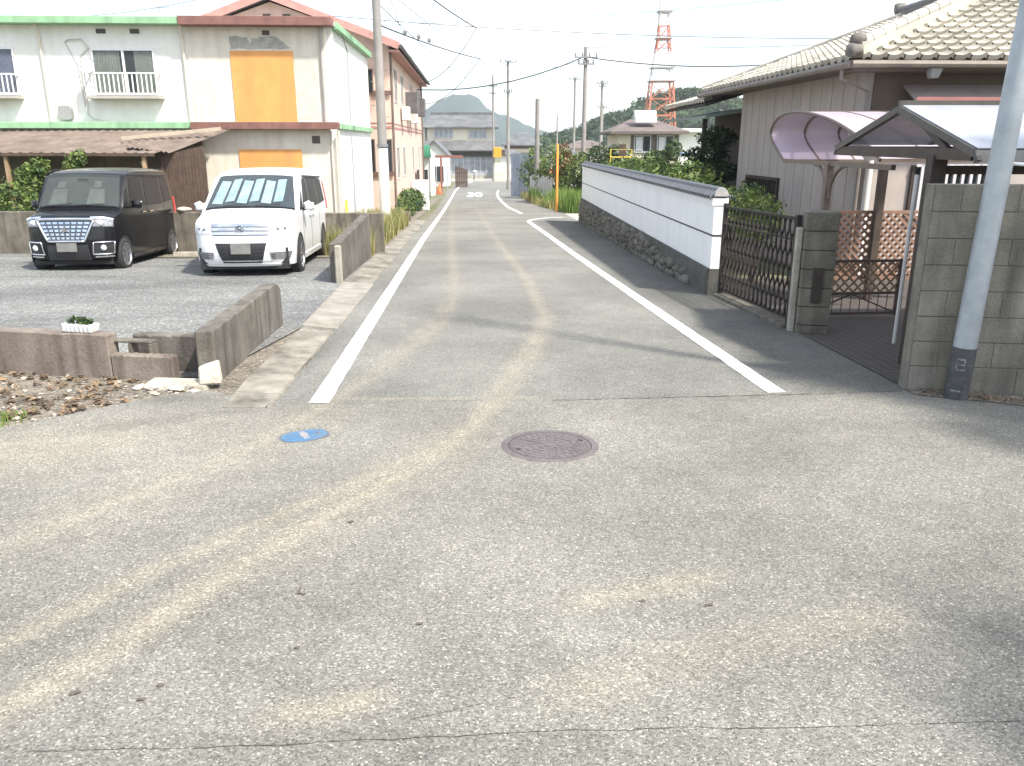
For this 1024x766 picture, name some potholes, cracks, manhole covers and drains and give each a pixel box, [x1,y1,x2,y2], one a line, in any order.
manhole cover [501,430,599,462]
utility cover [279,429,329,443]
crack [49,720,1024,751]
